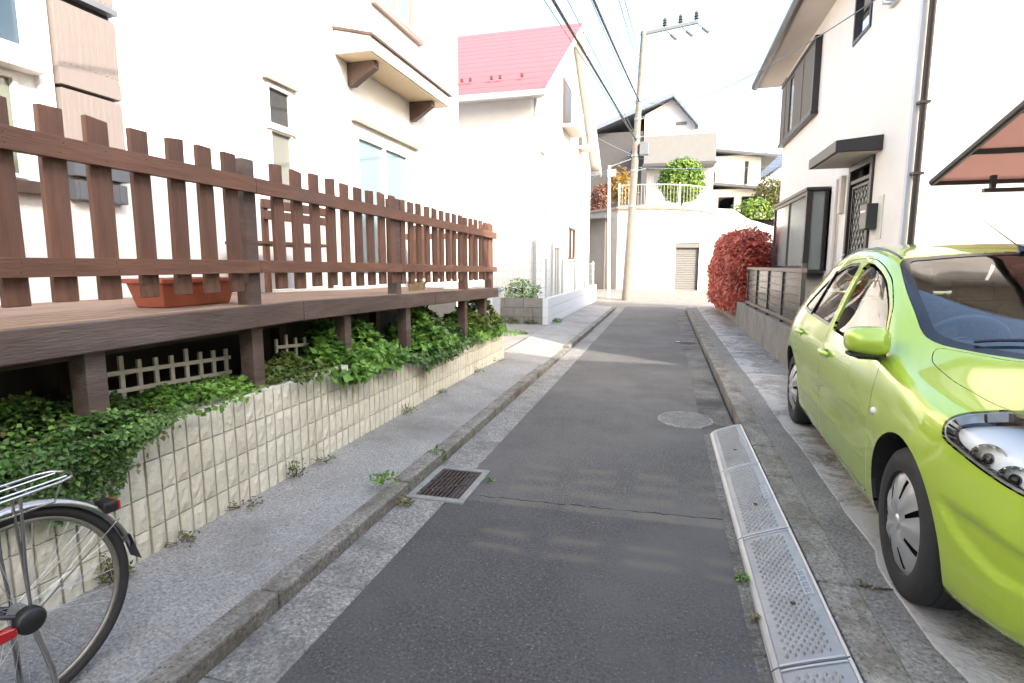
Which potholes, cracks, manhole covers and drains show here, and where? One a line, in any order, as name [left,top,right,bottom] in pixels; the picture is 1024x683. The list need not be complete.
manhole cover [658,411,713,428]
drain grate [406,465,491,505]
